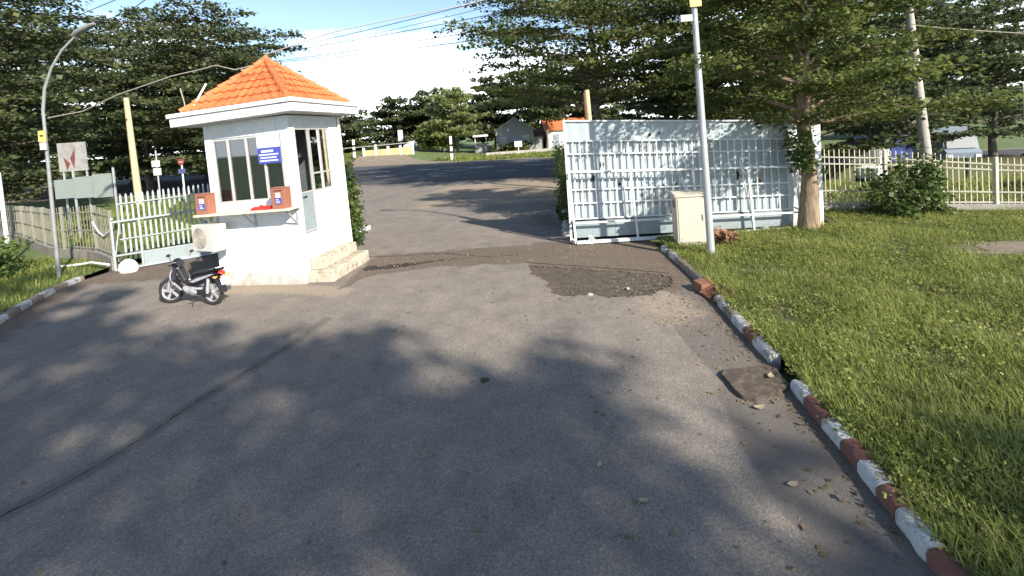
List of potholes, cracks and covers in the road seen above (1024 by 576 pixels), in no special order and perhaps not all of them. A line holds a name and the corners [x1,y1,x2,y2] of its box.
pothole [528,265,673,298]
